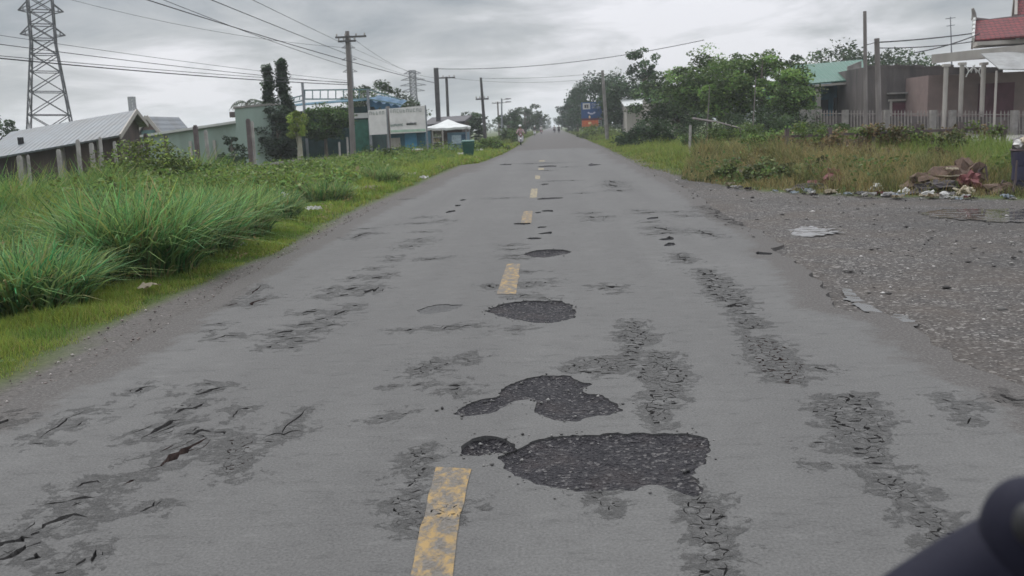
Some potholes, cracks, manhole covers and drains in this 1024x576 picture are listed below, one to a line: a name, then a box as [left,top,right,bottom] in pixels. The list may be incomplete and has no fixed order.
pothole [524,249,570,258]
crack [136,383,306,475]
crack [683,494,729,576]
pothole [498,433,711,497]
crack [677,256,827,384]
crack [810,394,948,545]
crack [0,479,103,574]
pothole [461,436,517,456]
pothole [454,375,623,422]
pothole [487,300,576,323]
crack [32,412,82,444]
crack [566,322,687,424]
